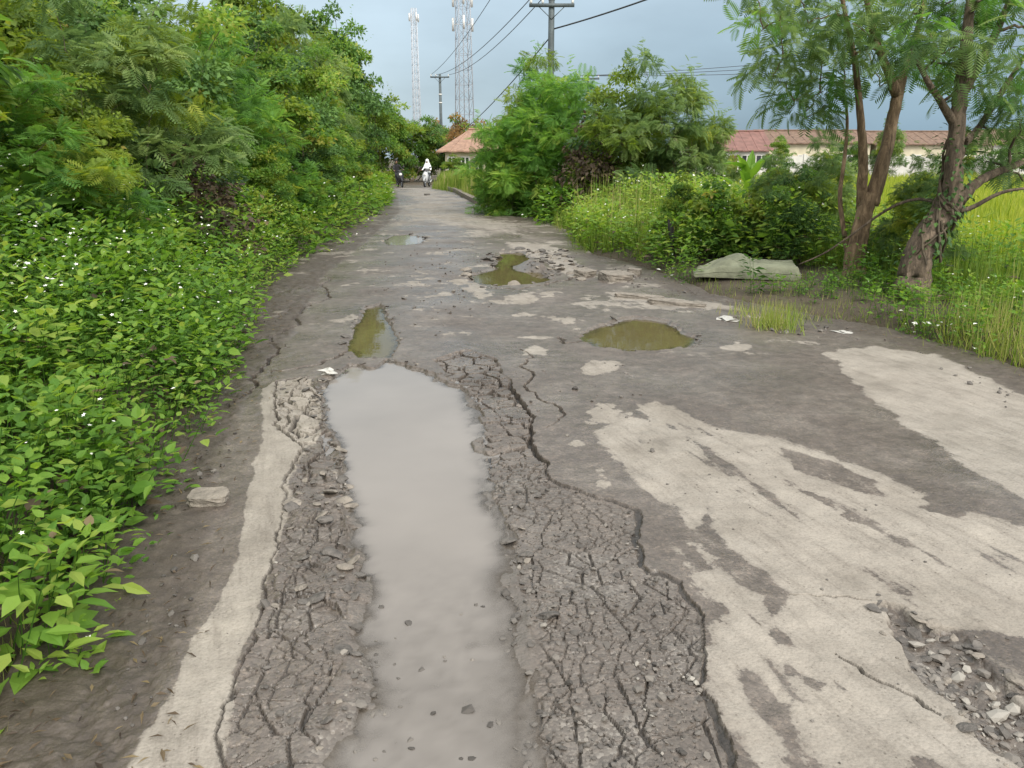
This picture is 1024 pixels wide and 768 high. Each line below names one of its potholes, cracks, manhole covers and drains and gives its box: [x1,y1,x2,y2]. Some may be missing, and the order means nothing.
pothole [380,232,430,246]
pothole [338,303,401,359]
crack [213,349,356,768]
pothole [866,593,1024,768]
pothole [271,359,567,768]
pothole [459,247,596,288]
pothole [574,315,702,351]
crack [434,337,739,768]
